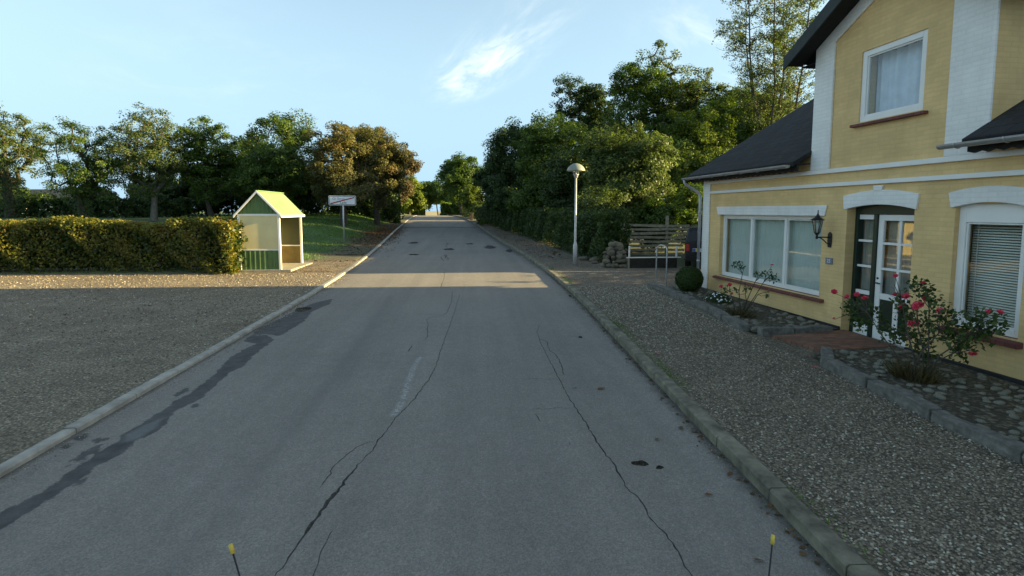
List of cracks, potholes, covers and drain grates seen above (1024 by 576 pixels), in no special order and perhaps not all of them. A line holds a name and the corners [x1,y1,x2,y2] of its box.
crack [536,327,693,576]
crack [275,244,460,576]
